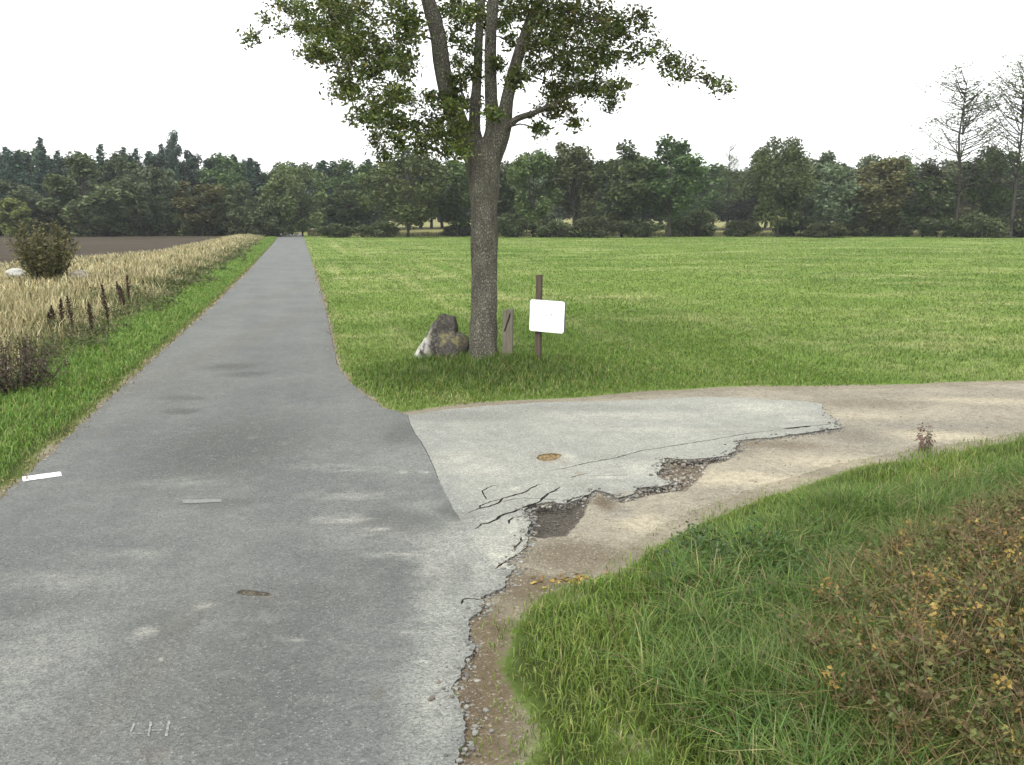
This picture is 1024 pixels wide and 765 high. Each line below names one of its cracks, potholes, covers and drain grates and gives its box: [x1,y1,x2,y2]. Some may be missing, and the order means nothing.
pothole [527,496,590,539]
pothole [618,447,740,503]
crack [471,424,827,569]
